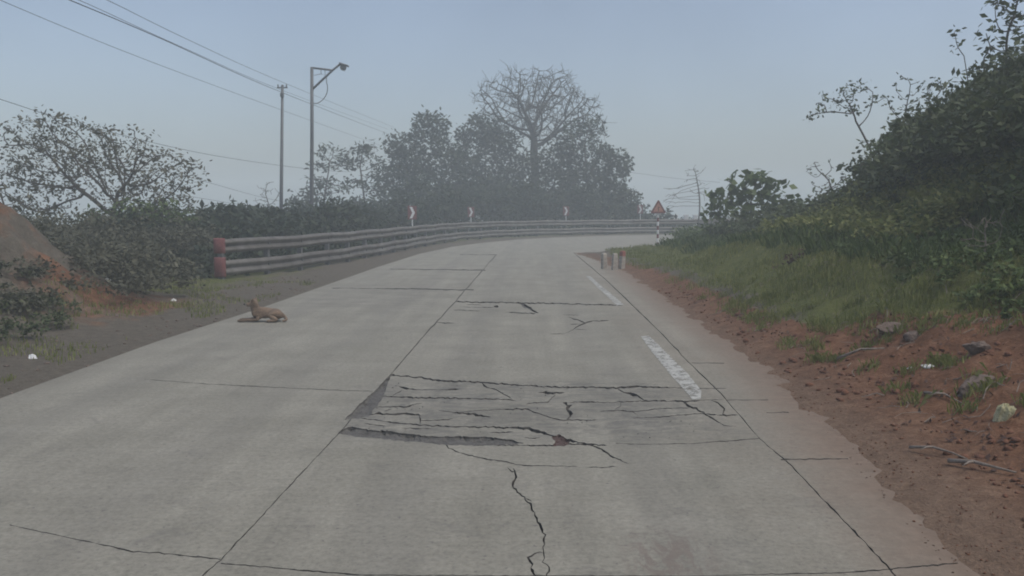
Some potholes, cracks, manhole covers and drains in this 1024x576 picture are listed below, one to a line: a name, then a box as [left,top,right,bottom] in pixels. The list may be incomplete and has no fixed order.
crack [438,301,622,334]
crack [507,467,550,576]
crack [361,374,735,468]
